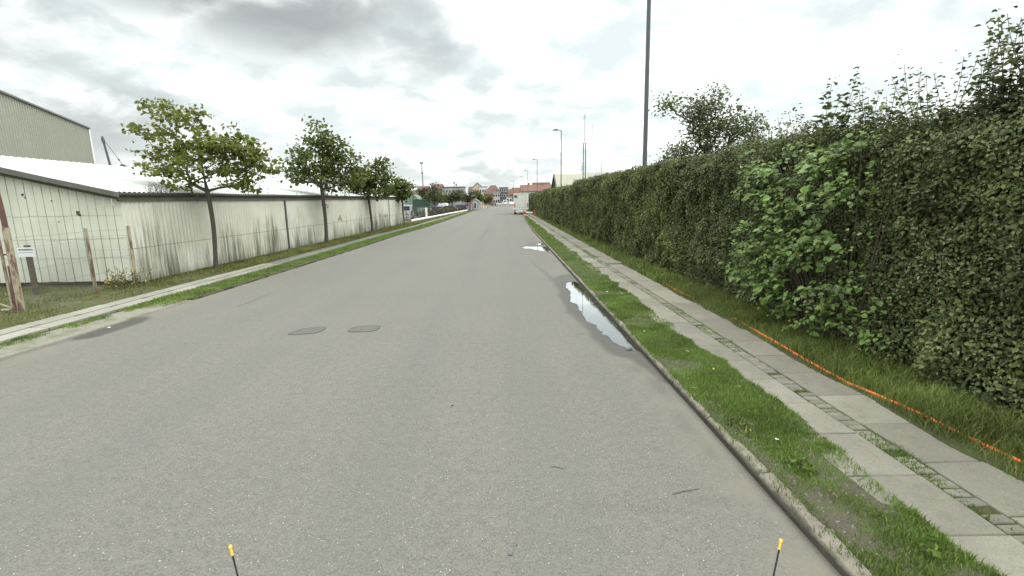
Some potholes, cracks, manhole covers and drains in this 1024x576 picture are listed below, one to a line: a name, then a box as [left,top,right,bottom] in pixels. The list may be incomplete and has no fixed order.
manhole cover [288,327,326,335]
